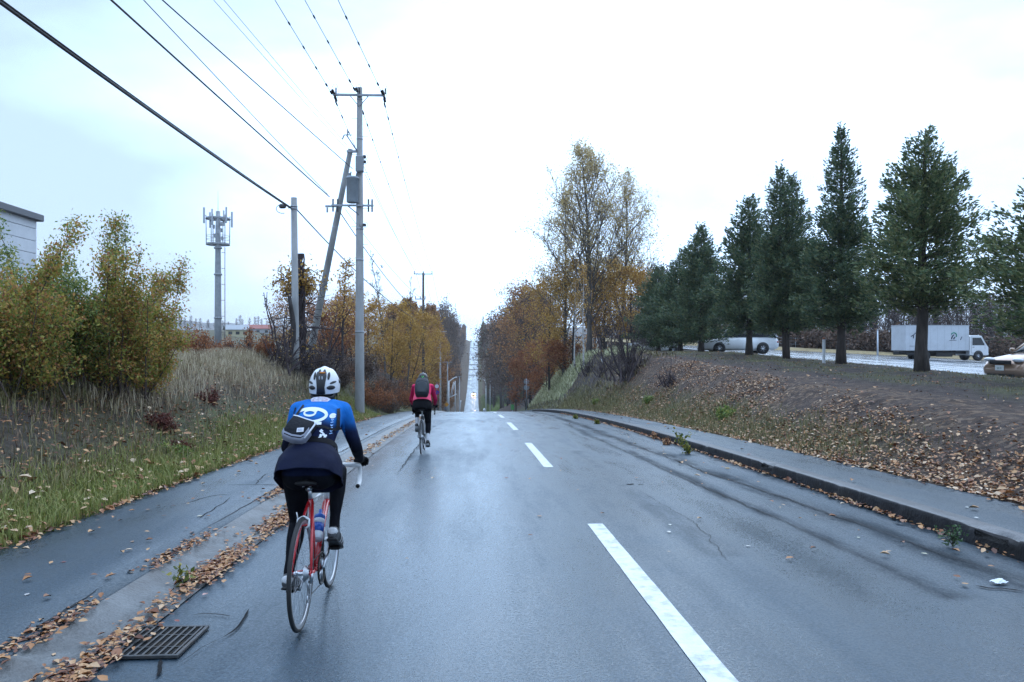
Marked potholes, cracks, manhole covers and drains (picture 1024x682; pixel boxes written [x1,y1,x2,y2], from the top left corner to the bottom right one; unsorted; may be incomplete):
drain grate [103,625,209,660]
crack [182,609,249,661]
